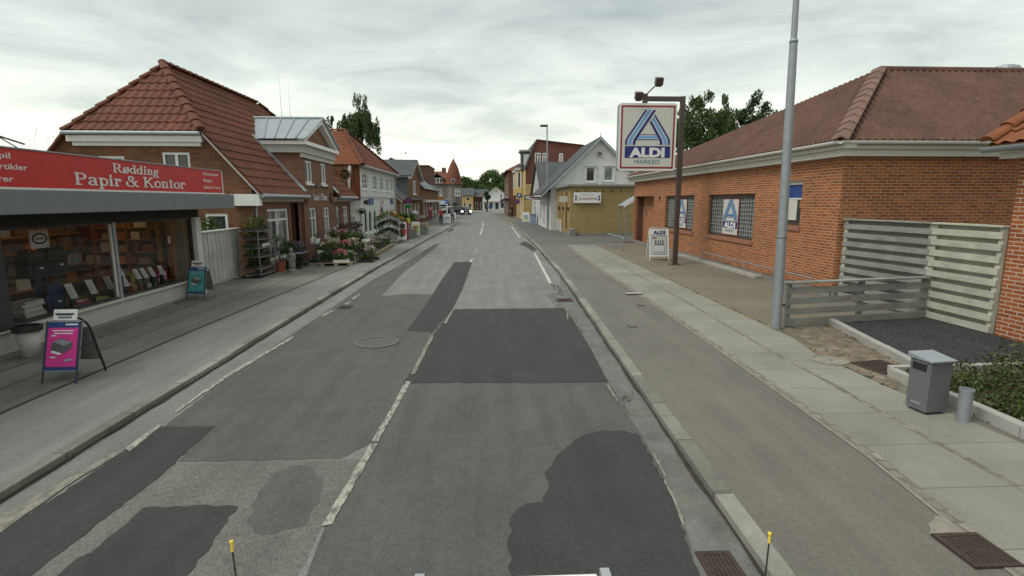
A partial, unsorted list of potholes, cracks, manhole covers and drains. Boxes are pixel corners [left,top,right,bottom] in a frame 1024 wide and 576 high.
drain grate [694,550,746,576]
drain grate [850,359,896,375]
manhole cover [809,355,849,366]
manhole cover [354,336,399,348]
drain grate [931,532,1024,570]
